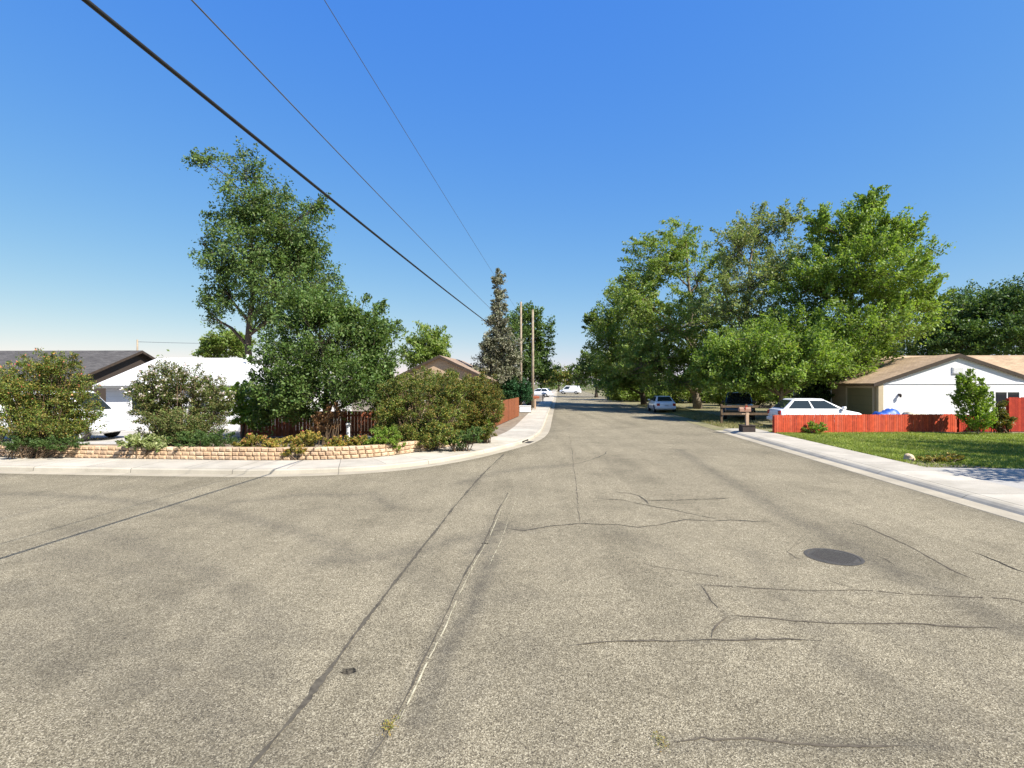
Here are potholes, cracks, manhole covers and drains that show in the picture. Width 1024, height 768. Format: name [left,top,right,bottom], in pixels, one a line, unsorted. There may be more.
crack [844,521,971,578]
crack [677,736,903,747]
crack [365,435,767,768]
crack [569,564,1022,646]
manhole cover [804,548,865,566]
